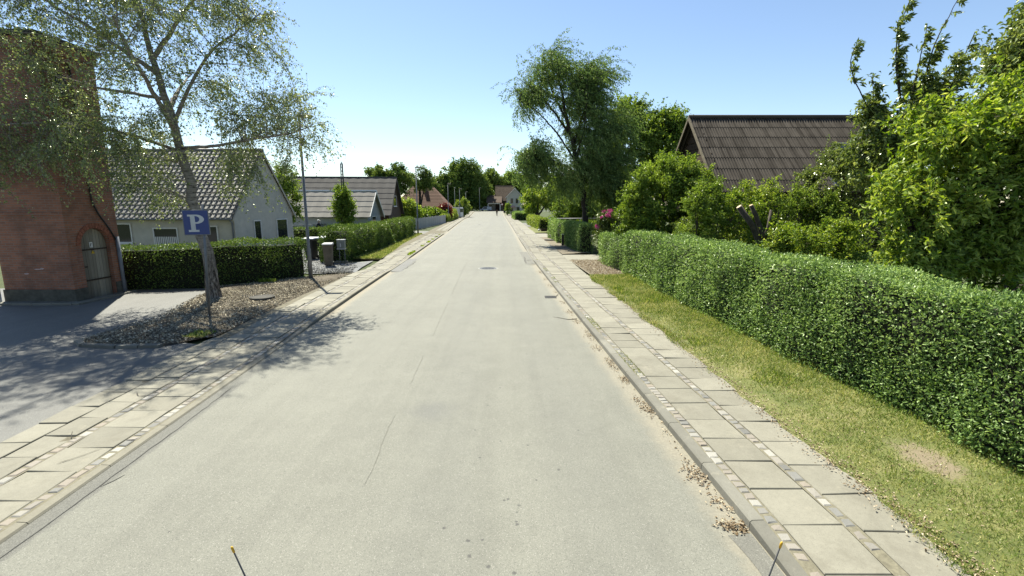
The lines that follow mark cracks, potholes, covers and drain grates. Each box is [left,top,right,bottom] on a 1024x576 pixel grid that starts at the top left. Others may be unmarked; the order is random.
crack [364,266,465,485]
